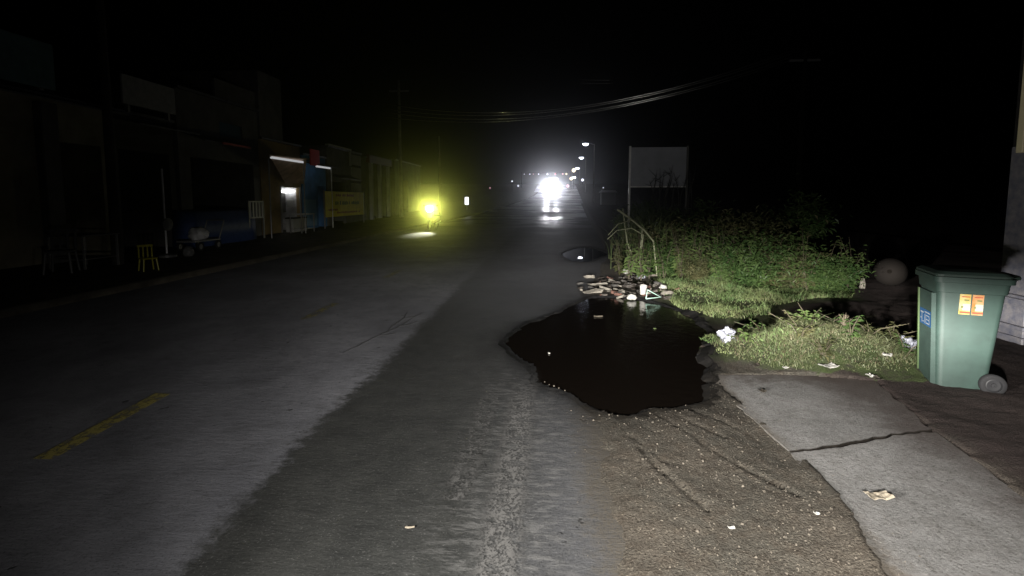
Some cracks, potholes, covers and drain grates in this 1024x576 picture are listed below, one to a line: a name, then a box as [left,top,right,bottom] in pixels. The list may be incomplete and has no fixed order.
crack [343,313,422,353]
crack [789,429,933,453]
pothole [498,295,721,420]
